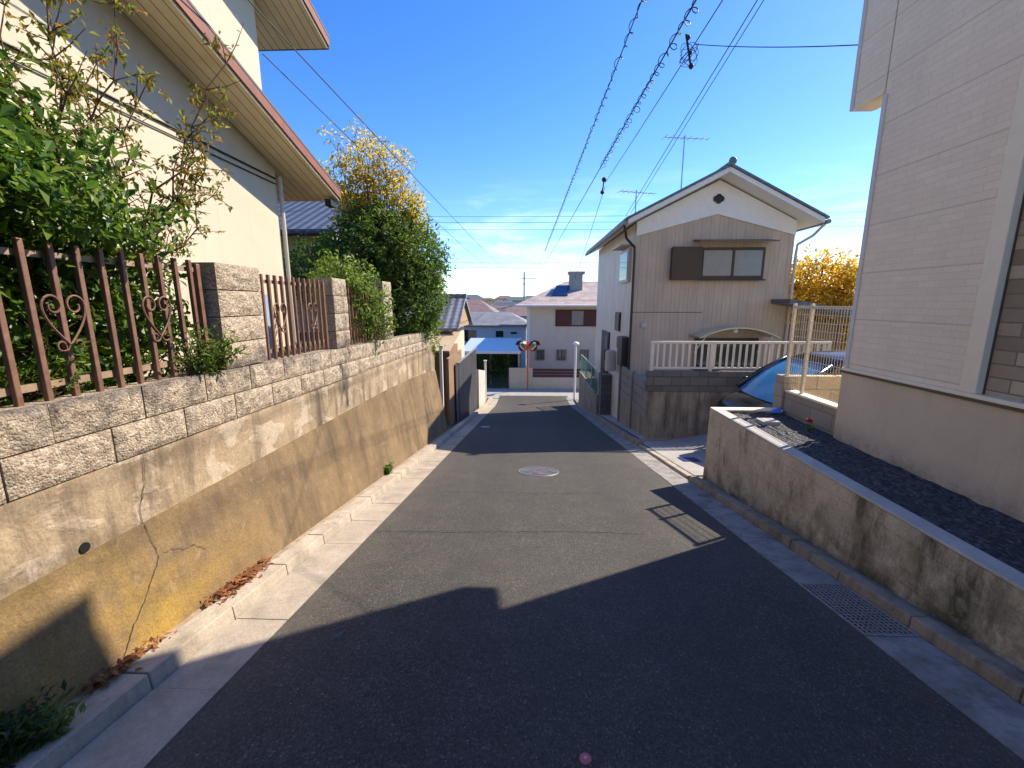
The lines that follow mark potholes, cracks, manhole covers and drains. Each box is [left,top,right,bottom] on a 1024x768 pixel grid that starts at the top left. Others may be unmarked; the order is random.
drain grate [798,582,921,637]
manhole cover [518,466,559,476]
